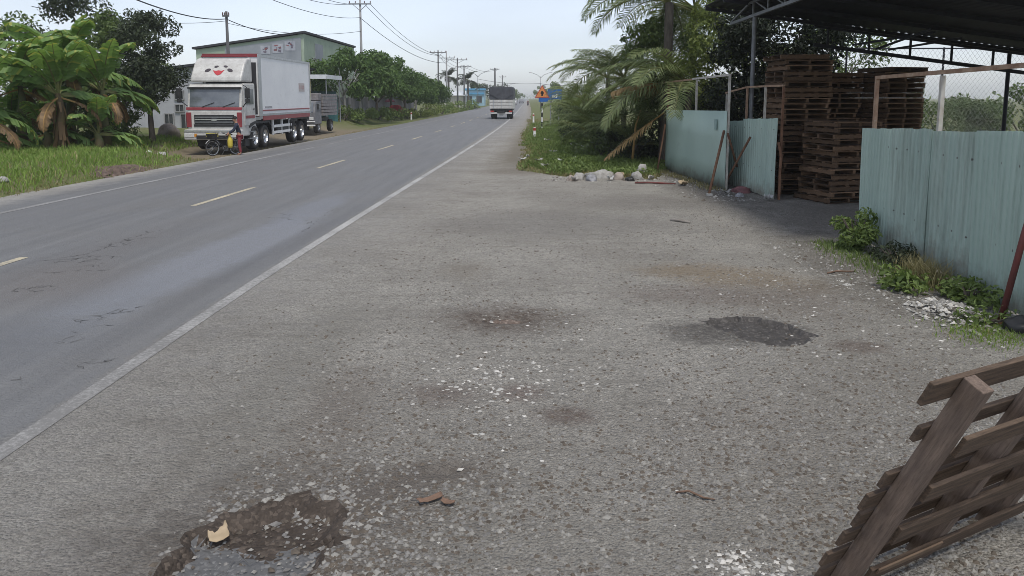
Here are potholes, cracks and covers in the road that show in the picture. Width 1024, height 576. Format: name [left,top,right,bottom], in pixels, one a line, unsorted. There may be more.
pothole [152,490,352,576]
